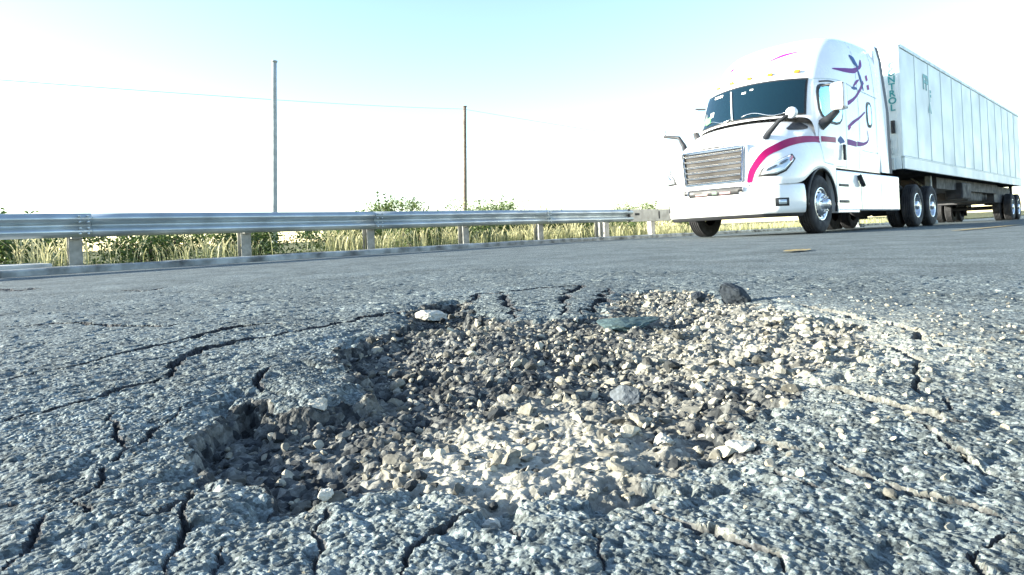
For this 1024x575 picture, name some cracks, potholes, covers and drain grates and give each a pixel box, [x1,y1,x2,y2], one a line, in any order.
crack [400,508,522,575]
crack [466,285,616,319]
crack [755,304,1021,575]
pothole [132,287,1024,574]
crack [1,311,406,571]
